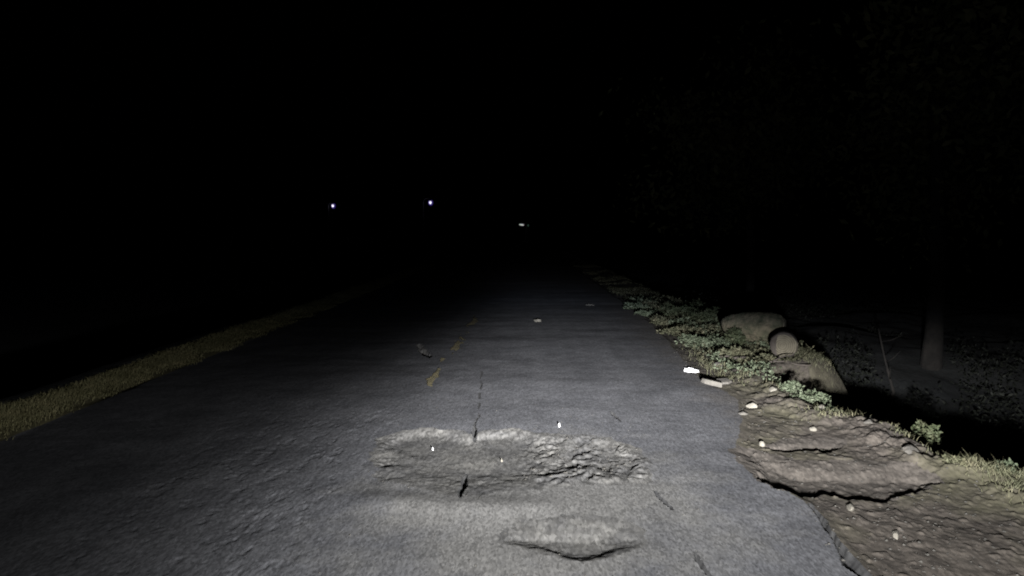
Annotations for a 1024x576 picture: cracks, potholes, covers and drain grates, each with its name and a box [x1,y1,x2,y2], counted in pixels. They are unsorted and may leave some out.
pothole [367,427,653,496]
pothole [496,512,648,562]
crack [457,371,484,498]
pothole [728,444,944,503]
crack [654,490,674,510]
